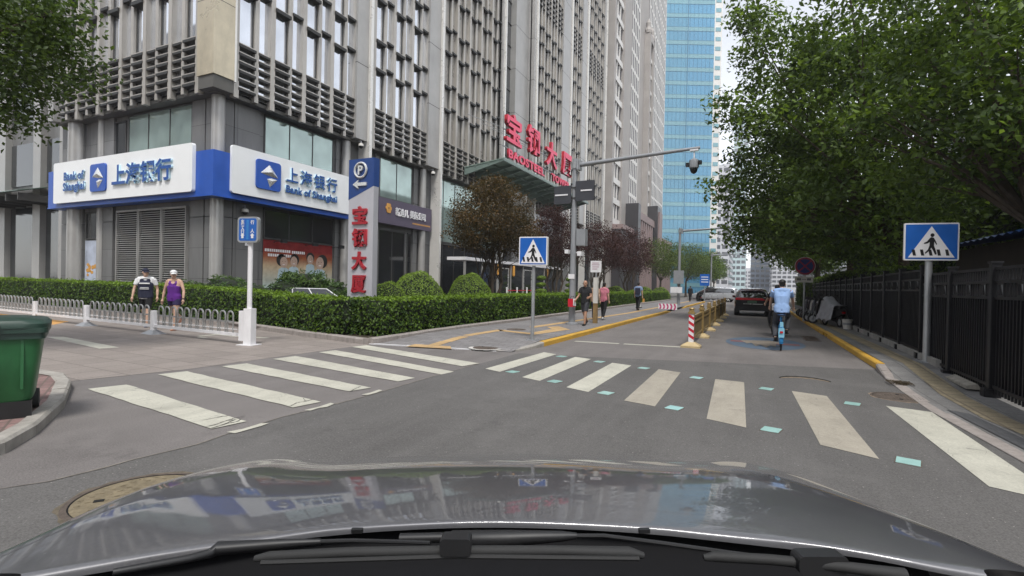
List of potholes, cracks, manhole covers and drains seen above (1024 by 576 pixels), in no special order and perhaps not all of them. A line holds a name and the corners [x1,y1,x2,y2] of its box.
manhole cover [868,392,924,403]
manhole cover [51,471,193,524]
